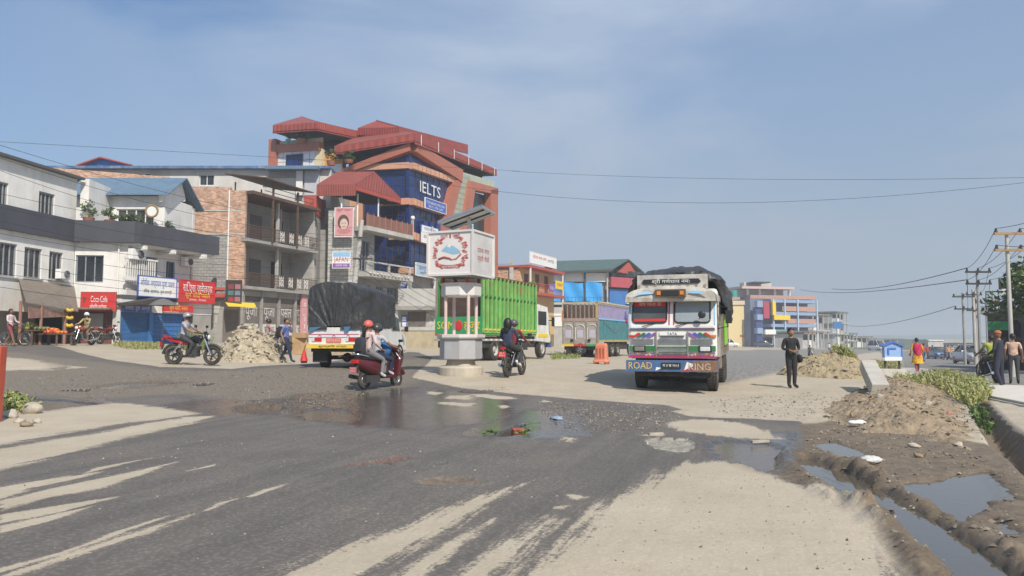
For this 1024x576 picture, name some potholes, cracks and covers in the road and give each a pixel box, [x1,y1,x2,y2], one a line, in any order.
pothole [491,424,532,438]
pothole [231,403,291,414]
